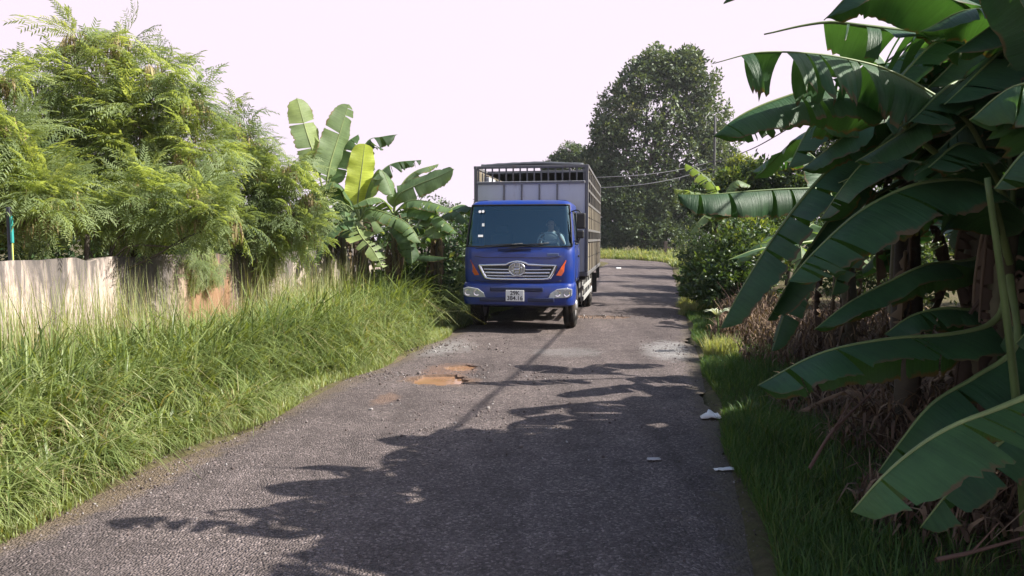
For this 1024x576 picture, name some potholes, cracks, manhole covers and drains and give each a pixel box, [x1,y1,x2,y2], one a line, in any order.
pothole [408,374,468,386]
